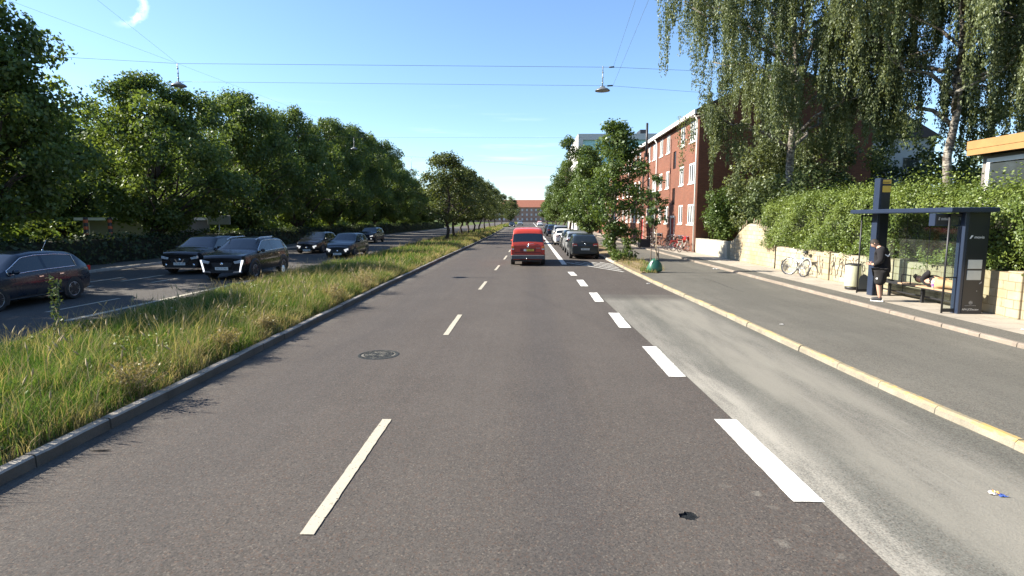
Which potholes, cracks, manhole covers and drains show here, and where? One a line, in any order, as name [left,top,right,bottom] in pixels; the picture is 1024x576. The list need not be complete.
manhole cover [358,350,400,360]
pothole [677,511,700,522]
